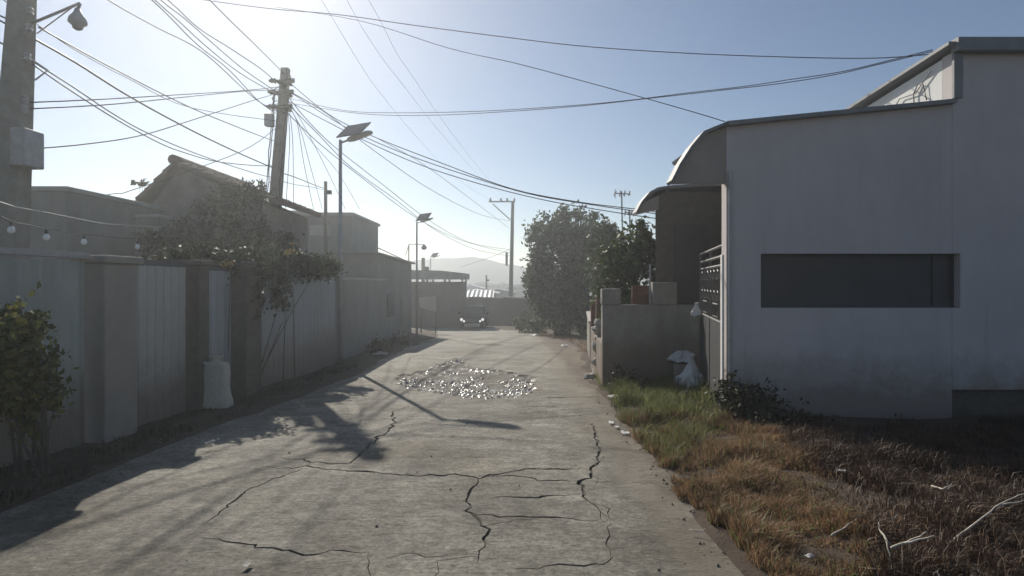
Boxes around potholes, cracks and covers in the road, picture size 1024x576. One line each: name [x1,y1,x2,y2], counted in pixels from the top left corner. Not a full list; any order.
crack [204,408,615,576]
pothole [394,357,539,399]
